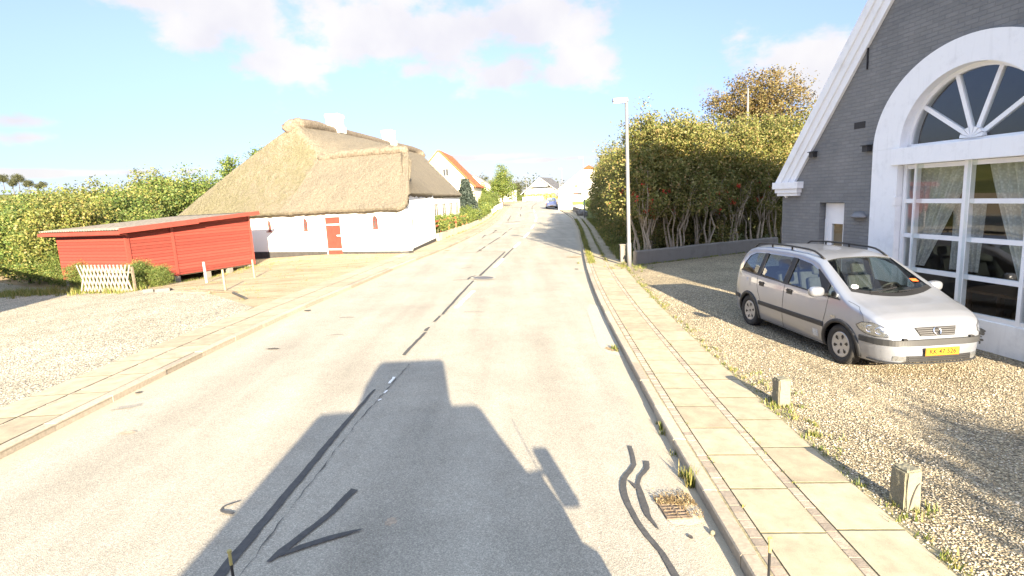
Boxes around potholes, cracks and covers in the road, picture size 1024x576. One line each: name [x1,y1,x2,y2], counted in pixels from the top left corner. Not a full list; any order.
crack [220,500,241,514]
